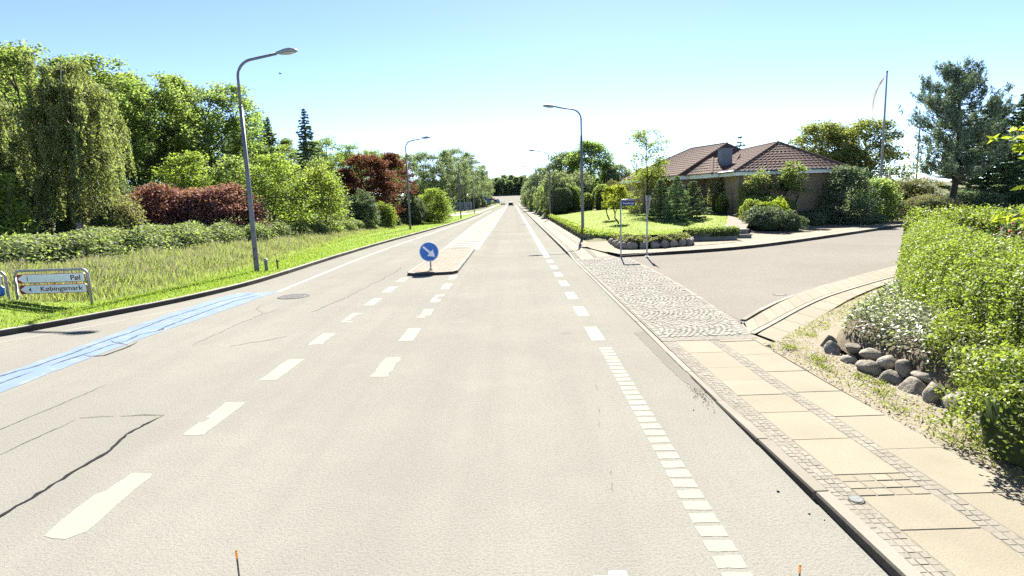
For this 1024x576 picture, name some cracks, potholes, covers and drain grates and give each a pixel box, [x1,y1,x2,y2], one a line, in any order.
crack [0,293,287,384]
crack [0,386,159,517]
